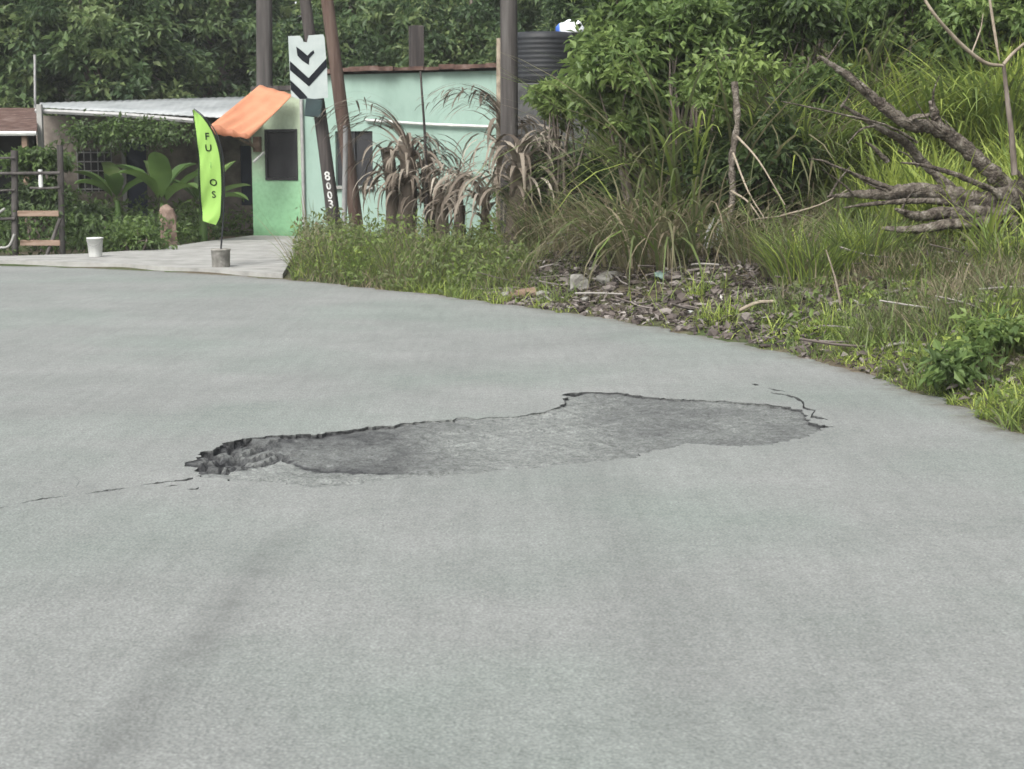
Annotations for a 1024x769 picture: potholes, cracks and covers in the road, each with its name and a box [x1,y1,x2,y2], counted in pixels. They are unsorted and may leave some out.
crack [0,477,199,508]
pothole [184,392,828,488]
crack [753,384,828,420]
